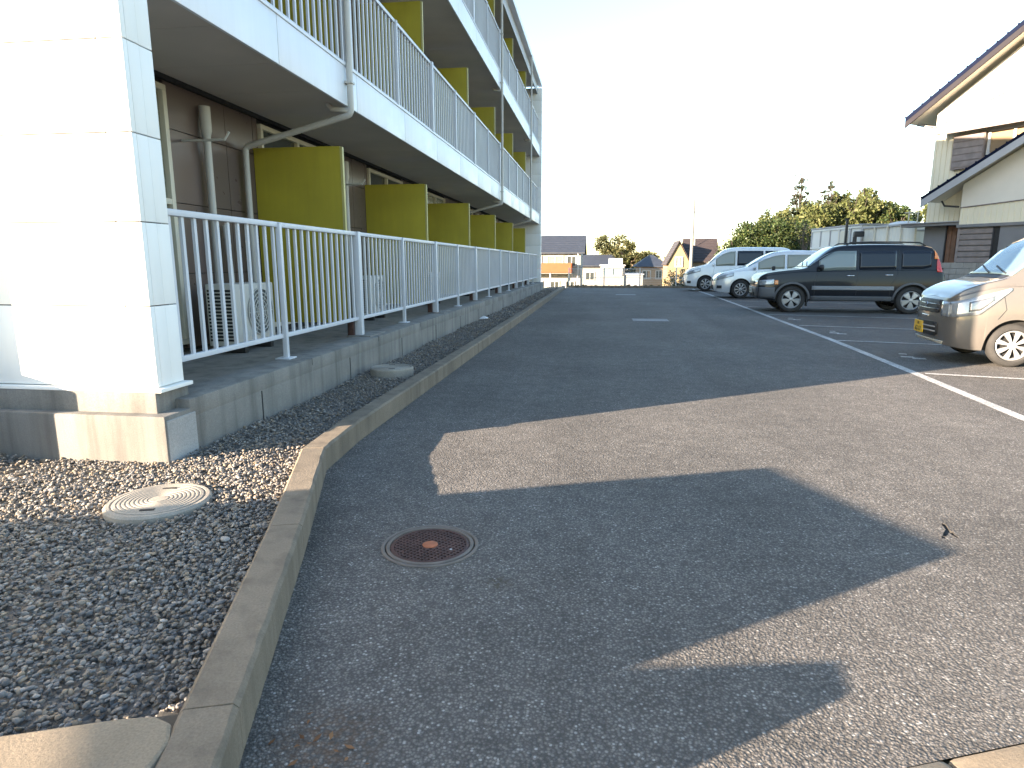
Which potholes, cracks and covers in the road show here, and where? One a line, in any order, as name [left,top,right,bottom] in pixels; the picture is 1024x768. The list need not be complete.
manhole cover [102,483,213,529]
manhole cover [370,364,414,381]
manhole cover [381,525,478,568]
